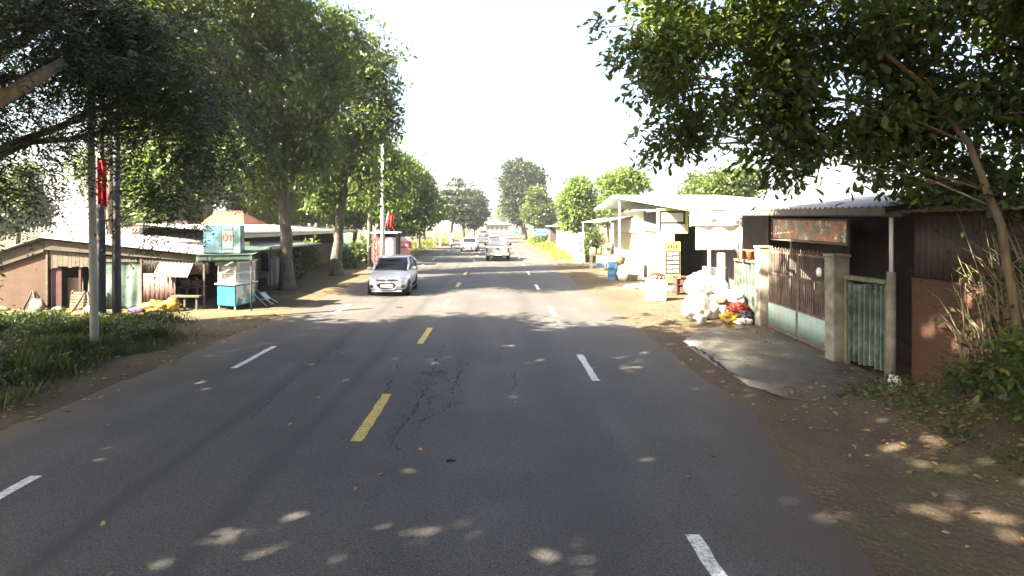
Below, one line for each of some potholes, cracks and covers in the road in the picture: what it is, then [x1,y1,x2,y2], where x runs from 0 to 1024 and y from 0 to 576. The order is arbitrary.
crack [366,342,473,459]
